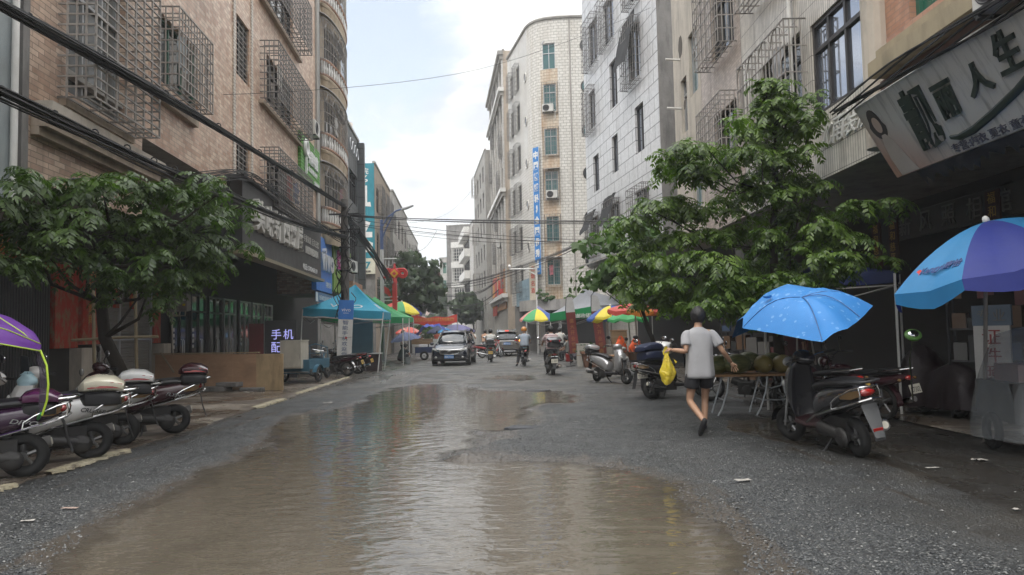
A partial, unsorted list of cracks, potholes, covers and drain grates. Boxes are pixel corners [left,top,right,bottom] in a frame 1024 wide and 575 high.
pothole [30,383,782,575]
pothole [468,374,542,382]
